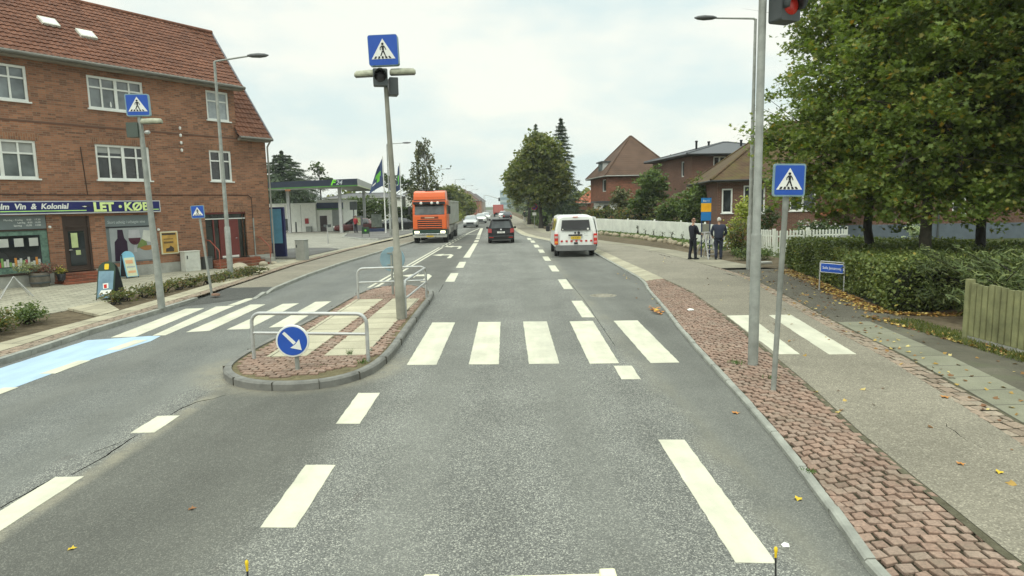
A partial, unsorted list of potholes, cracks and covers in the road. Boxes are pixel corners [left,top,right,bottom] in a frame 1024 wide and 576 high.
crack [73,435,137,474]
